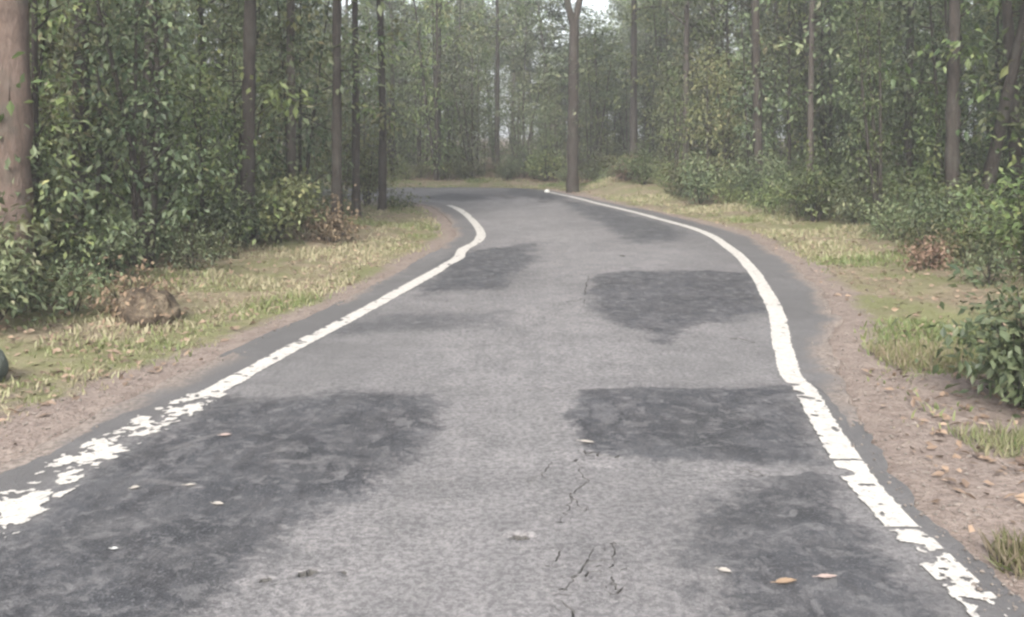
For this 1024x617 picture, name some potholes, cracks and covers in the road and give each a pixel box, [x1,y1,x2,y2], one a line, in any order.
crack [553,275,594,307]
crack [524,448,627,522]
crack [543,540,633,617]
